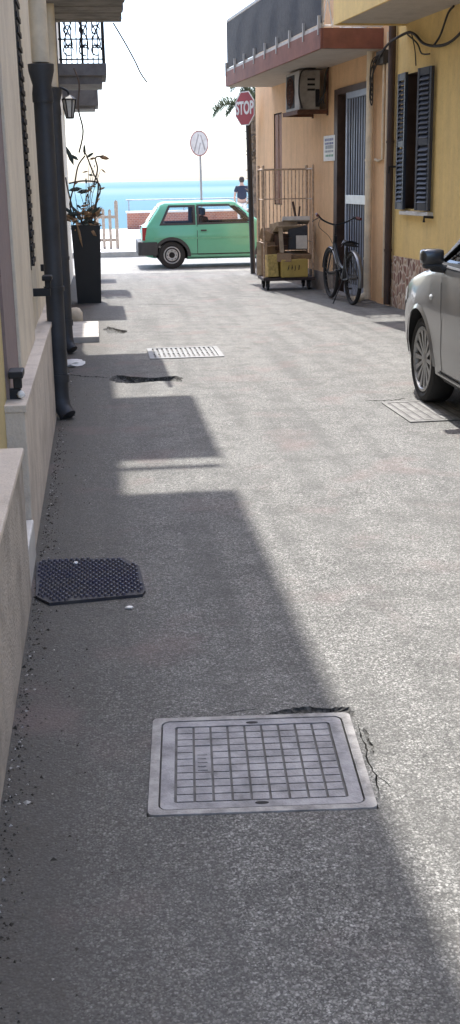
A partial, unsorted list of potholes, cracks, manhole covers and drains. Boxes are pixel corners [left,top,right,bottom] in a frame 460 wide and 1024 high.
crack [358,726,387,791]
drain grate [147,346,225,360]
manhole cover [148,712,377,817]
manhole cover [382,400,460,423]
pothole [110,375,183,383]
